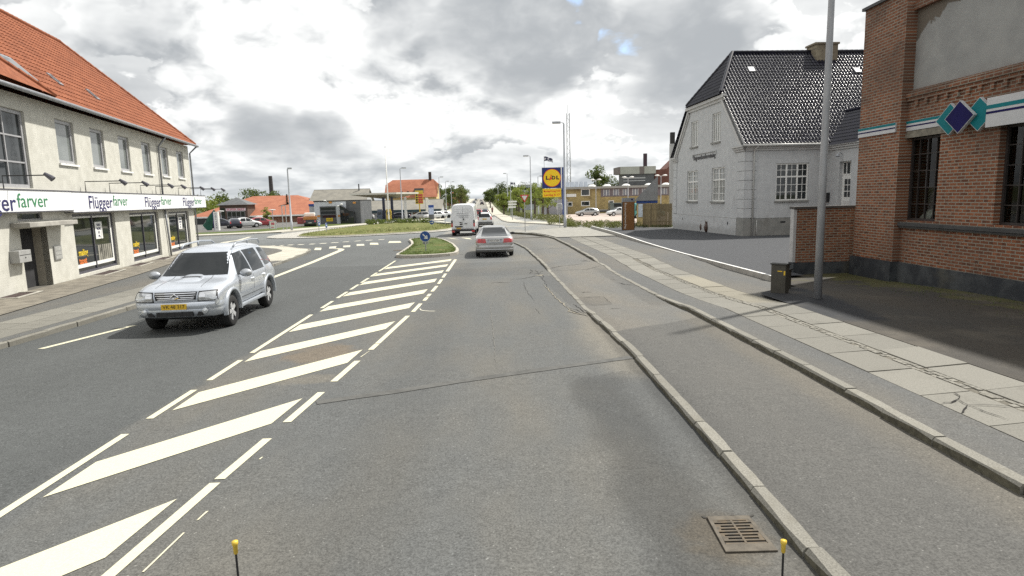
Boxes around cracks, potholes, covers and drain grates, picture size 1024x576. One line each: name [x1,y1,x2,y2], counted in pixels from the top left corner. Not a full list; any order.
drain grate [702,514,778,553]
crack [523,260,630,315]
crack [943,393,1011,419]
